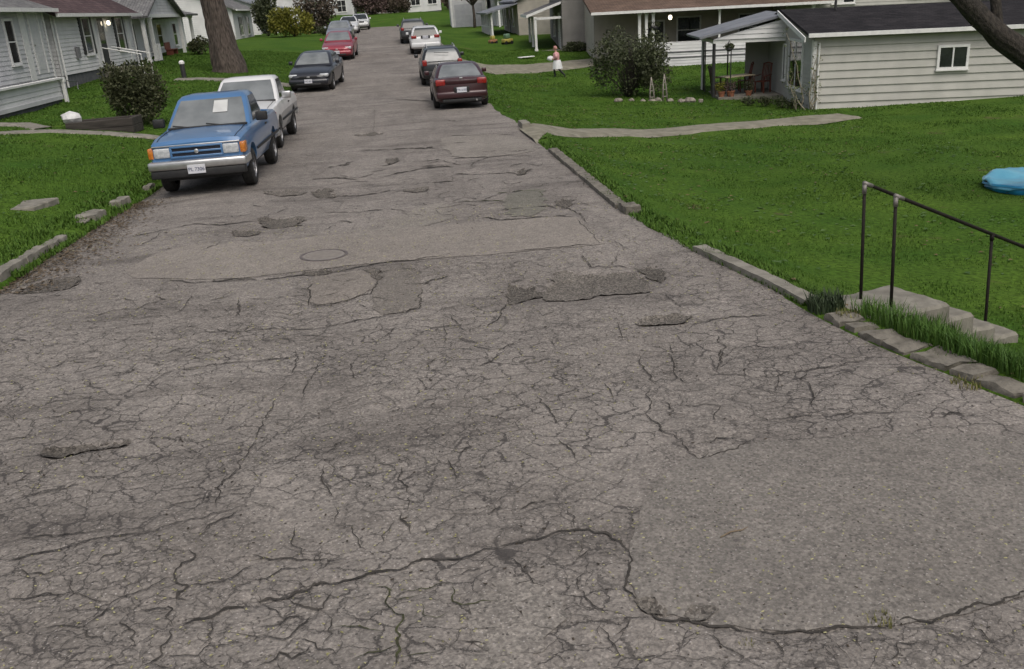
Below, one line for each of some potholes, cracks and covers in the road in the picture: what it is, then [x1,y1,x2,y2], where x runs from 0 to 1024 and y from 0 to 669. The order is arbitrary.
pothole [549,270,651,302]
pothole [638,266,666,283]
pothole [40,439,130,458]
crack [0,239,1024,669]
pothole [635,313,694,327]
pothole [506,285,545,305]
pothole [310,188,336,198]
pothole [12,276,80,294]
pothole [540,278,595,302]
manhole cover [299,249,348,261]
crack [131,142,587,245]
pothole [258,216,305,229]
